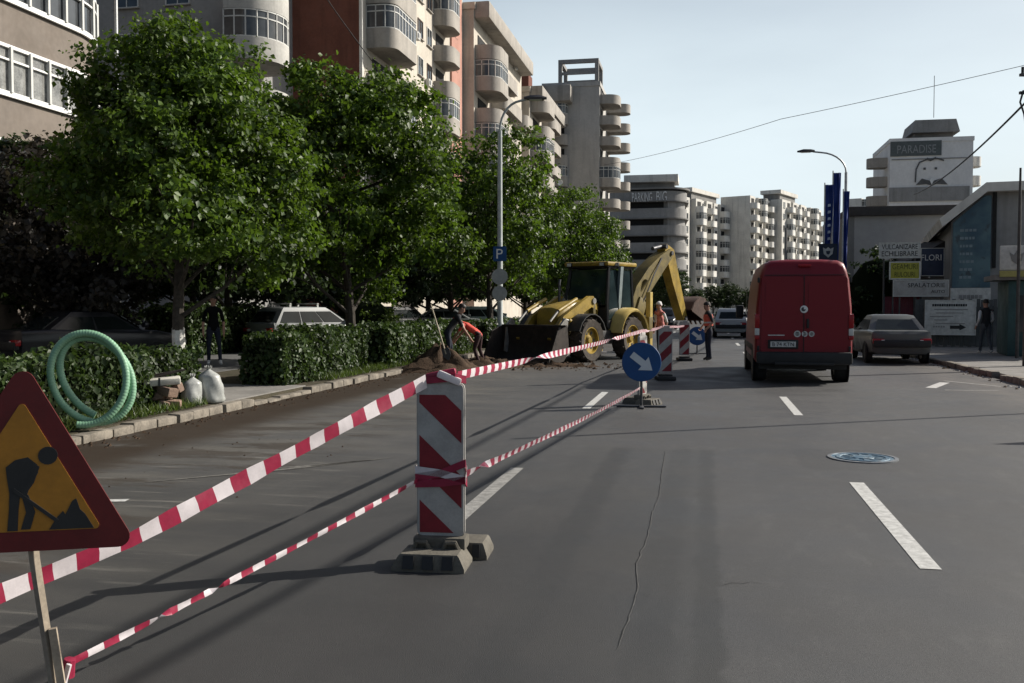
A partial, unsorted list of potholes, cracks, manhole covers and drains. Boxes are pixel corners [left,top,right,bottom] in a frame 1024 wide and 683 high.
manhole cover [827,452,899,464]
